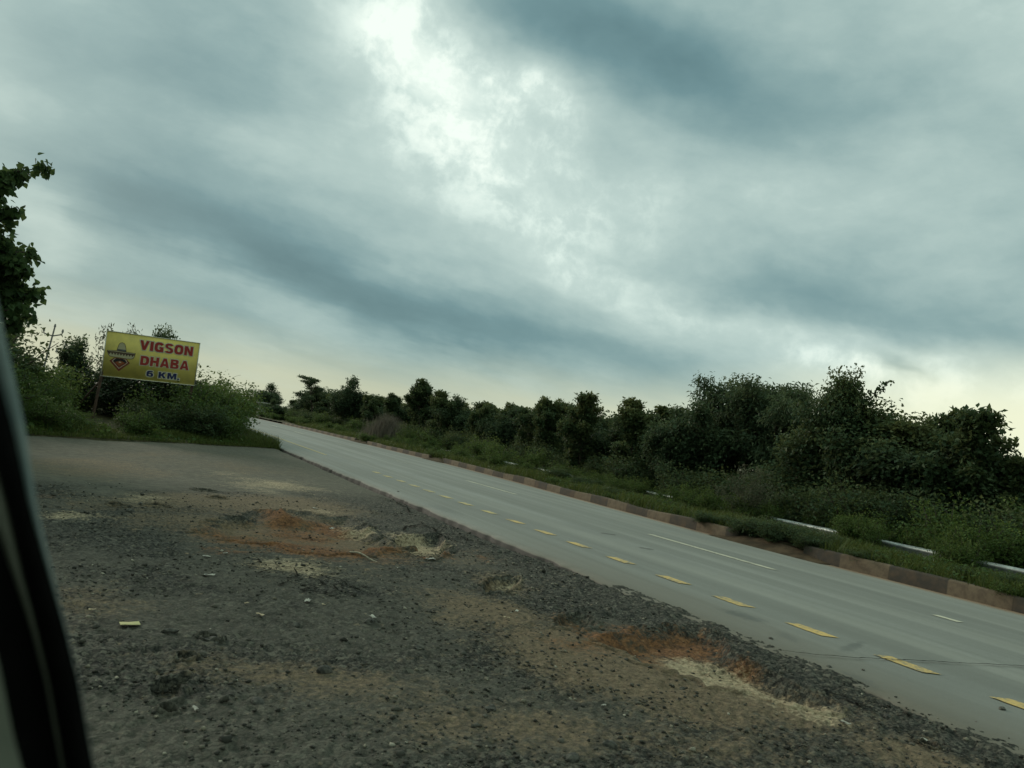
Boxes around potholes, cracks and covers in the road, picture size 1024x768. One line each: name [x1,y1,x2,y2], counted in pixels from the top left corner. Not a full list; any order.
pothole [582,621,849,718]
pothole [185,508,418,559]
pothole [155,701,181,716]
pothole [135,670,201,706]
pothole [473,574,524,595]
